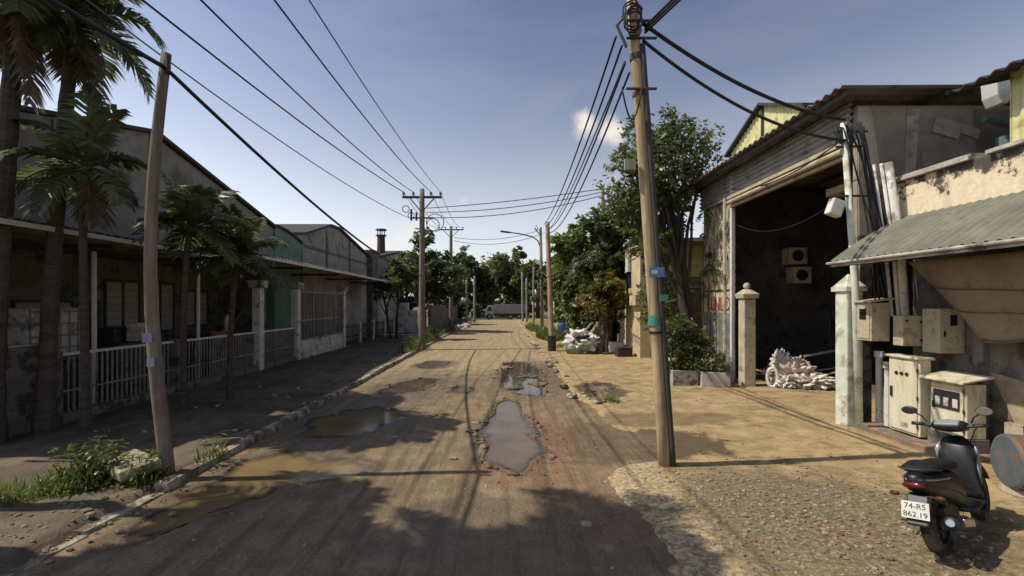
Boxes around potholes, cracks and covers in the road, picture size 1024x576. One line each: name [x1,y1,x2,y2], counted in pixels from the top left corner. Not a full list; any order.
pothole [576,381,626,401]
pothole [285,405,417,441]
pothole [408,360,456,370]
pothole [496,361,549,397]
pothole [371,377,443,395]
pothole [467,398,555,478]
pothole [104,447,386,549]
